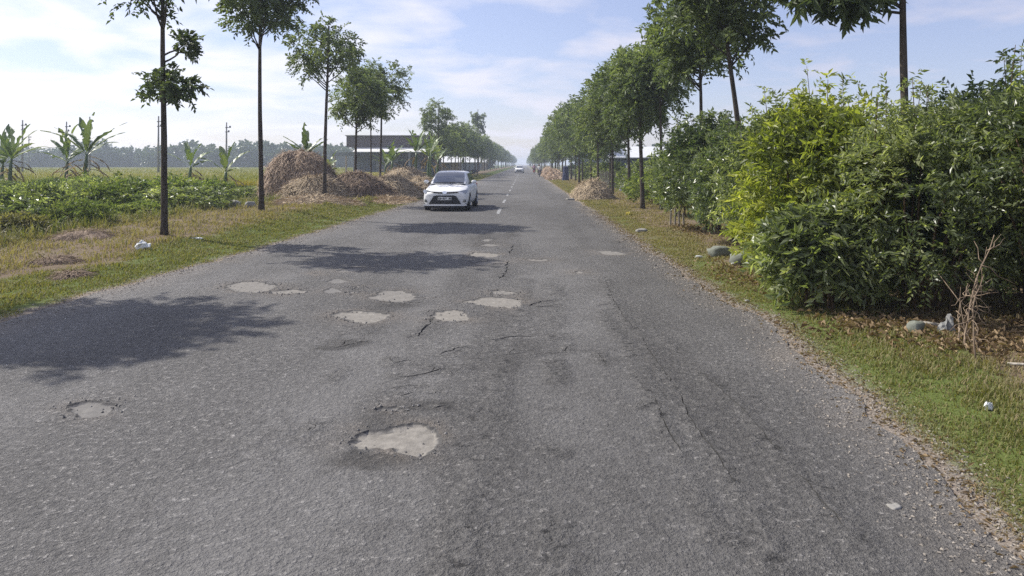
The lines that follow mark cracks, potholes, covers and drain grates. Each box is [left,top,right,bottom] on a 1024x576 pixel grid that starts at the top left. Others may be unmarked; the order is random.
pothole [217,281,288,293]
crack [601,280,847,529]
pothole [459,294,529,309]
pothole [361,288,436,303]
pothole [339,415,447,459]
crack [390,310,465,408]
pothole [417,309,479,323]
pothole [324,308,398,325]
pothole [52,395,136,419]
